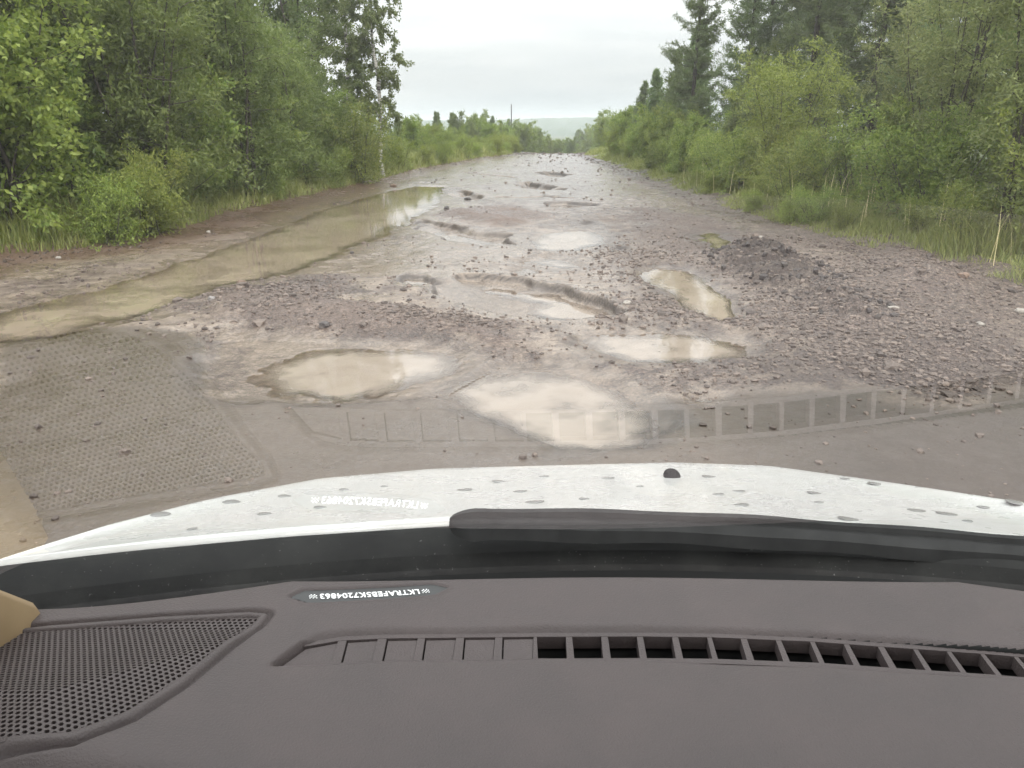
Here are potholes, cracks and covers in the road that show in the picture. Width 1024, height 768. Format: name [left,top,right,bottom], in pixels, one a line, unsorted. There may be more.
pothole [414,344,732,466]
pothole [378,269,439,288]
pothole [153,305,542,423]
pothole [421,270,645,322]
pothole [495,180,590,192]
pothole [605,256,795,325]
pothole [409,217,519,249]
